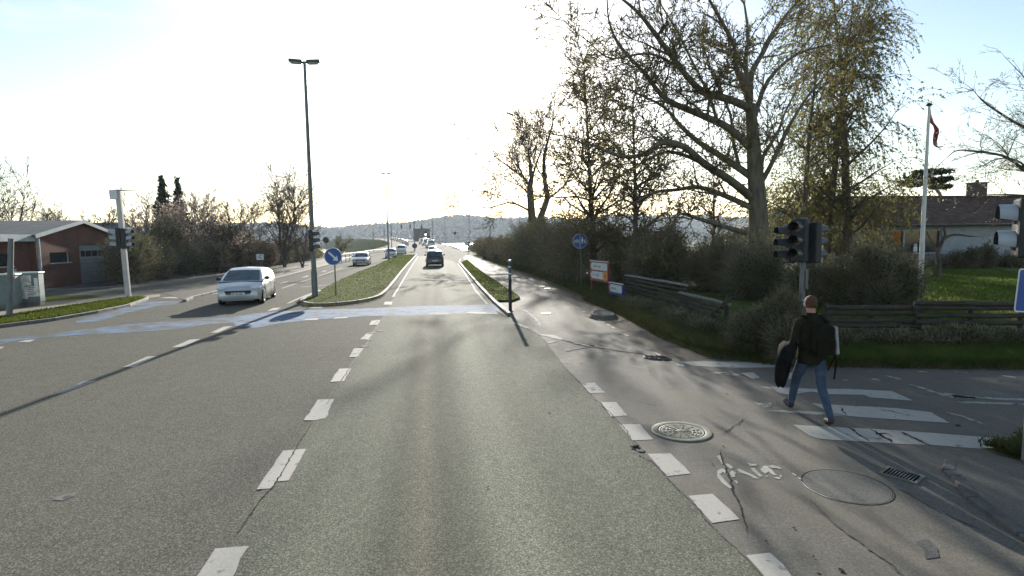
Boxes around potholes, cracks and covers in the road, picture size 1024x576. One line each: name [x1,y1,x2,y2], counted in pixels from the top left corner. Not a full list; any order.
crack [236,422,313,535]
manhole cover [800,469,895,505]
crack [841,407,930,445]
crack [810,500,905,576]
crack [720,452,747,532]
manhole cover [651,421,713,442]
drain grate [878,466,926,485]
